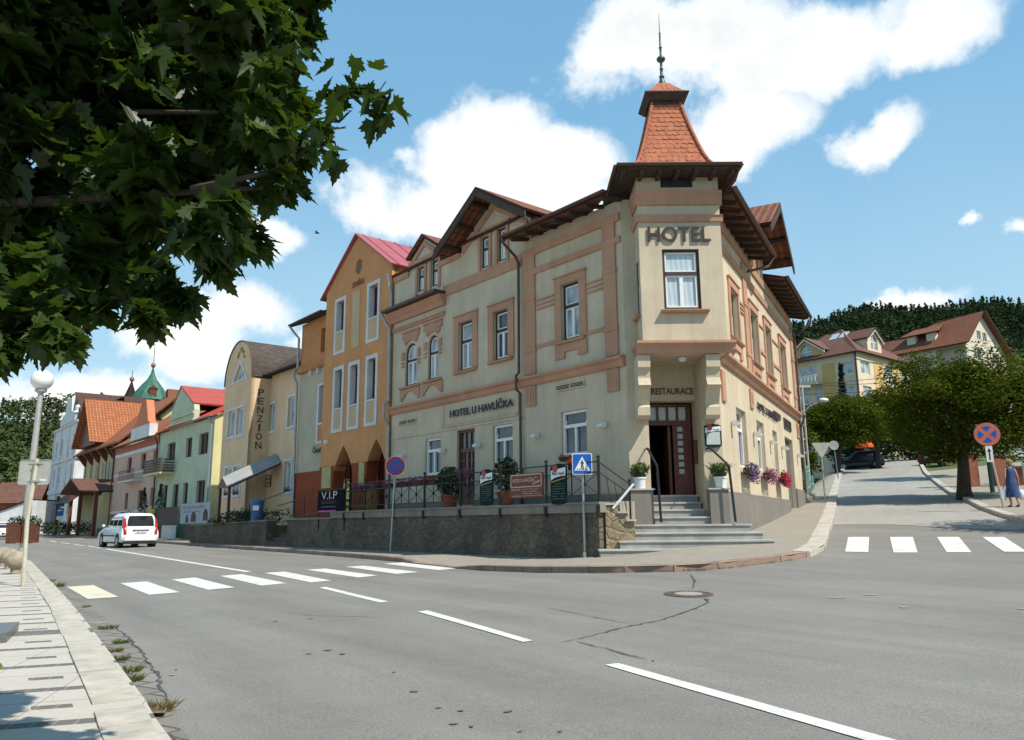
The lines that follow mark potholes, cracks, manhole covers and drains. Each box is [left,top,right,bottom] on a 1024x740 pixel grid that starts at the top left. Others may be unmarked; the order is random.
crack [550,574,709,659]
